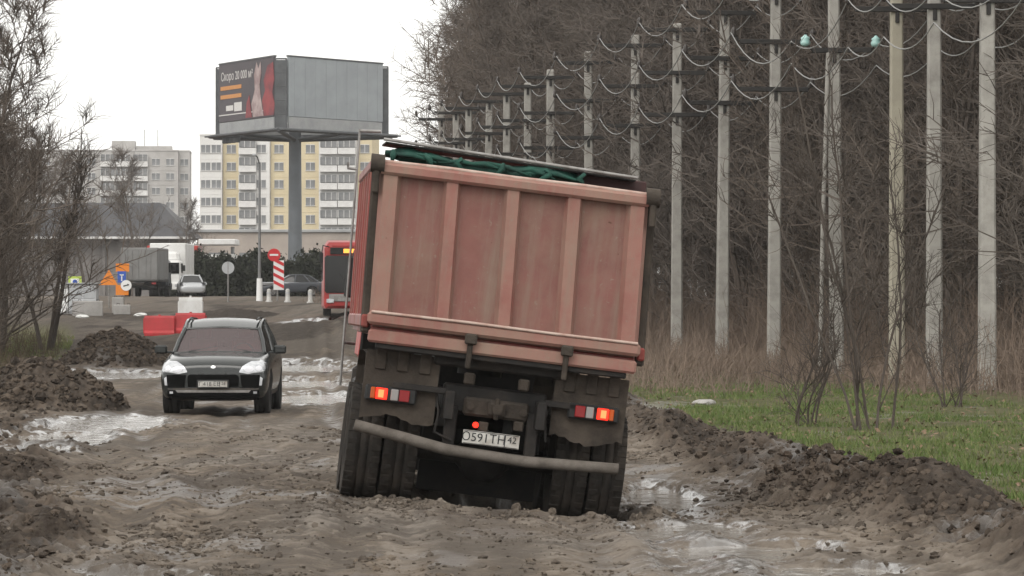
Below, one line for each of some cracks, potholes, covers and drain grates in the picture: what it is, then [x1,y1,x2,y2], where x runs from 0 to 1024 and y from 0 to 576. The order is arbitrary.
pothole [282,358,354,373]
pothole [282,390,347,405]
pothole [282,376,350,388]
